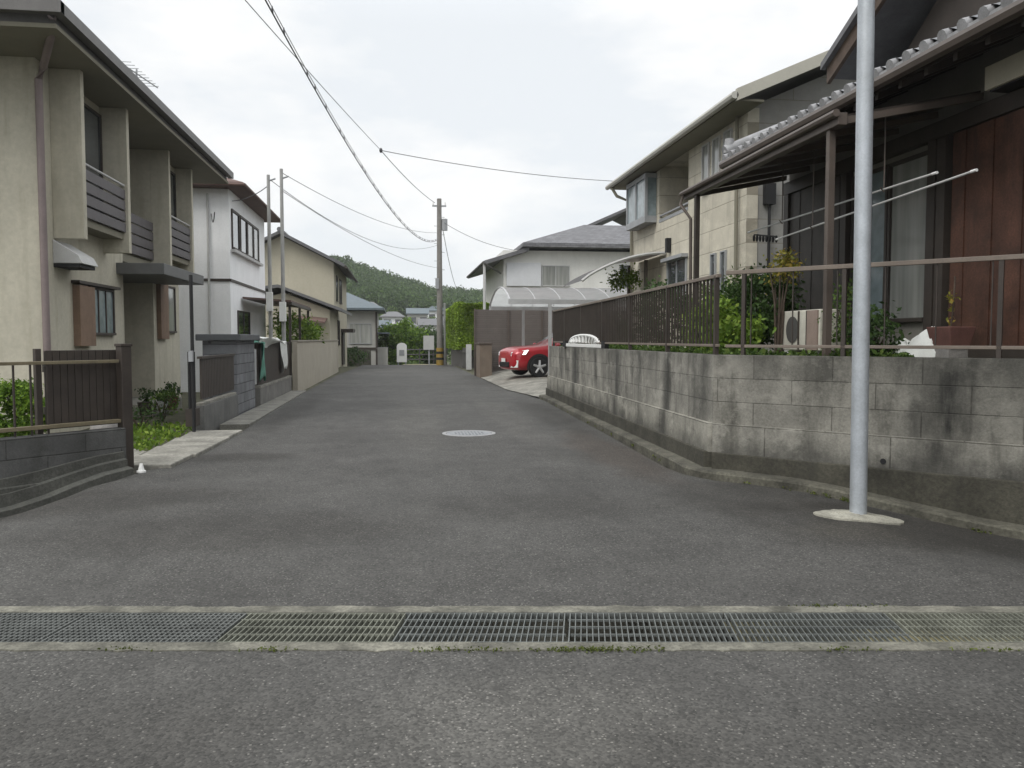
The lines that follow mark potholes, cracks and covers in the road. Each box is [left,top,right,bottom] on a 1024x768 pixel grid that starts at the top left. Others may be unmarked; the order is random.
drain grate [565,613,739,643]
drain grate [216,613,406,643]
drain grate [885,613,1024,643]
drain grate [0,613,87,642]
drain grate [725,613,915,643]
drain grate [40,613,247,643]
drain grate [392,613,566,643]
